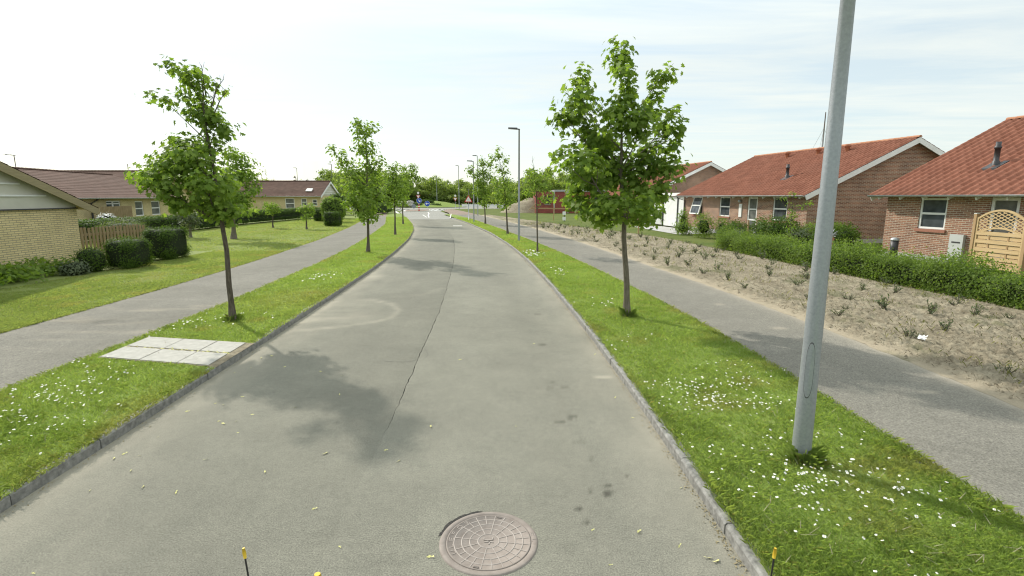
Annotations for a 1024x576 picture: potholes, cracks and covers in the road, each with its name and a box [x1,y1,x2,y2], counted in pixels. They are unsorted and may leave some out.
manhole cover [439,512,538,576]
